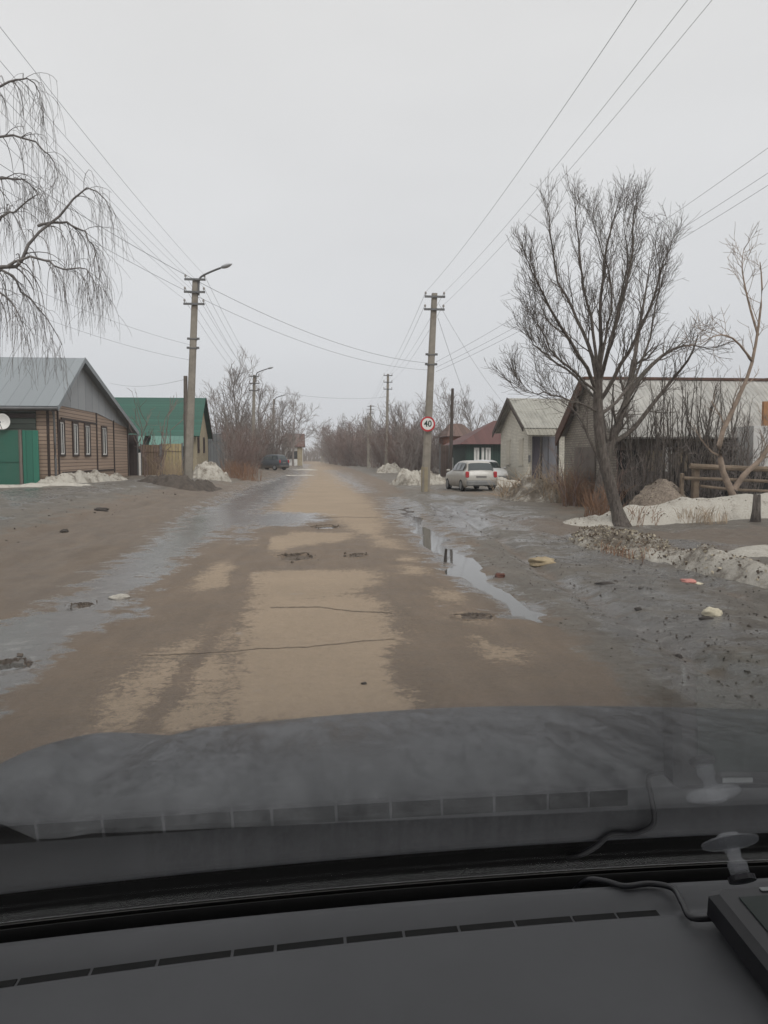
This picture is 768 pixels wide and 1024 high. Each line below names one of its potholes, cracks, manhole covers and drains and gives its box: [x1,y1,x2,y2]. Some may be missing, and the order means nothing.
pothole [273,552,317,563]
pothole [448,612,497,621]
pothole [0,653,38,675]
crack [142,638,396,655]
pothole [65,600,98,610]
